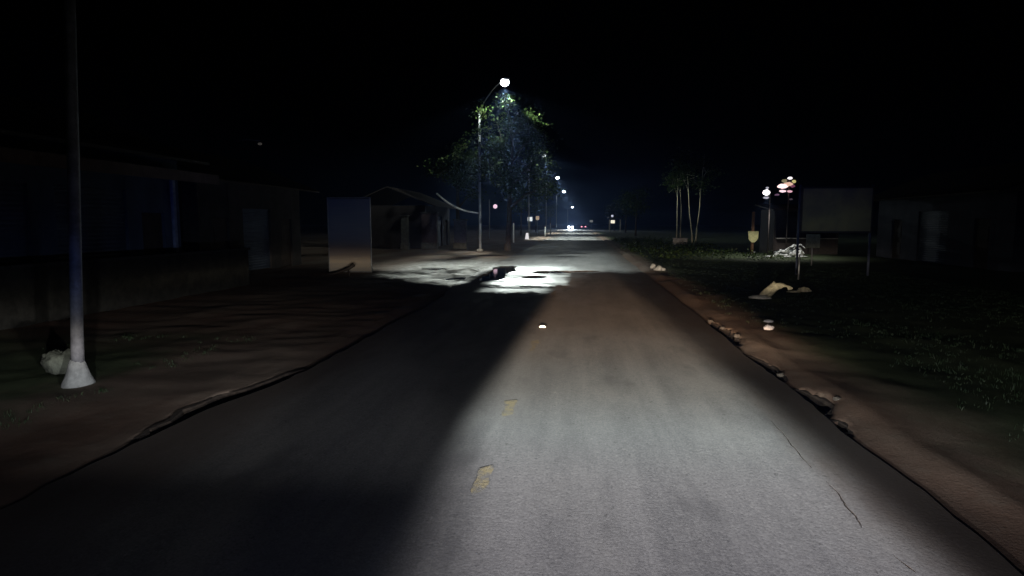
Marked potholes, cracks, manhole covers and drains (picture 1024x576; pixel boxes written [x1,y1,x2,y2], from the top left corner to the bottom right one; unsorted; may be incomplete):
pothole [476,266,518,281]
crack [830,485,862,527]
